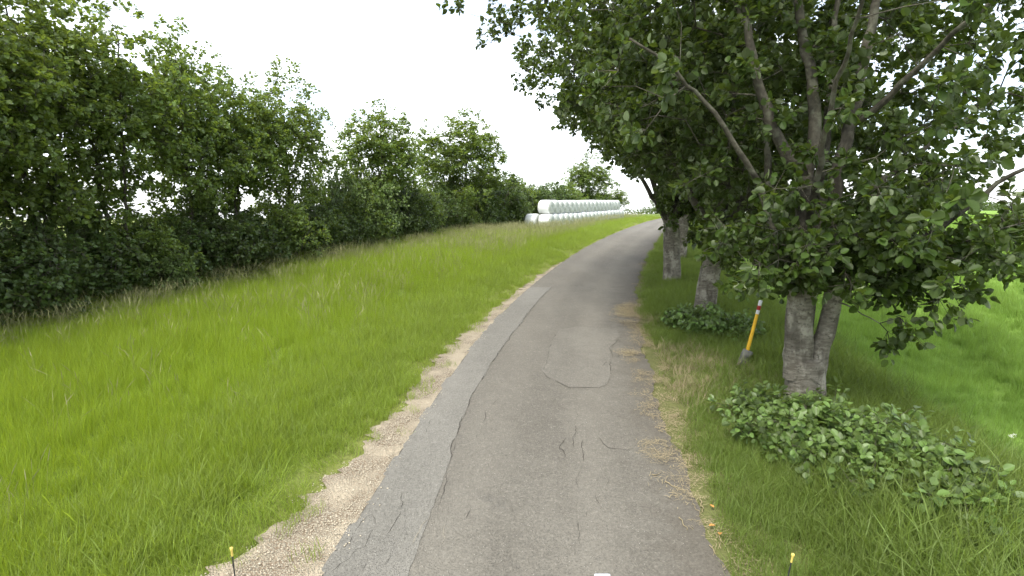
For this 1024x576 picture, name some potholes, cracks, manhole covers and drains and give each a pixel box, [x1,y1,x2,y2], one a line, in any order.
crack [559,414,607,549]
